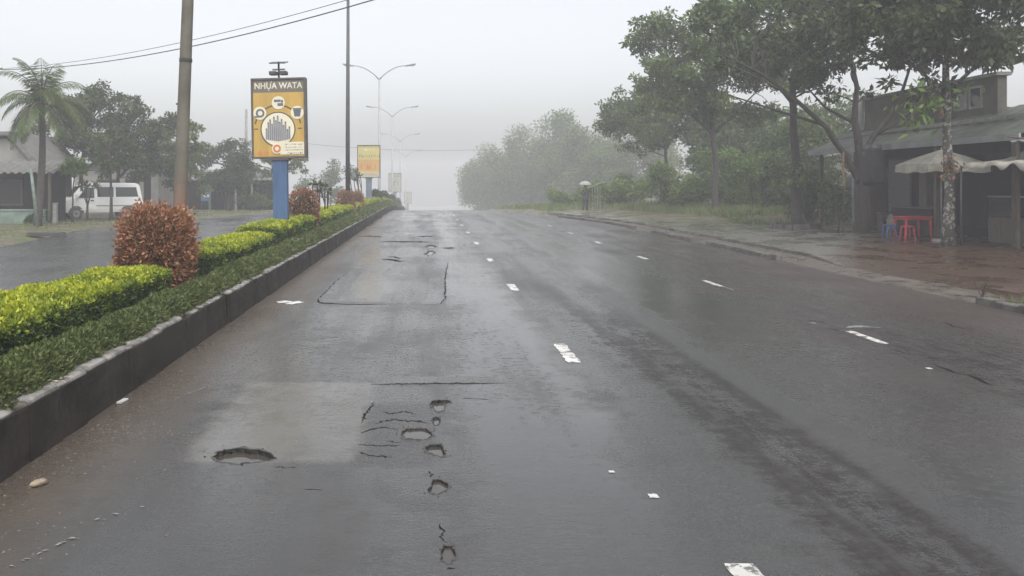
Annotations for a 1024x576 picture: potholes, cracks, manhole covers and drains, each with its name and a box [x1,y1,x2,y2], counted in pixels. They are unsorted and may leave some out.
crack [934,364,993,386]
pothole [396,426,435,440]
pothole [429,397,452,412]
pothole [424,476,452,497]
pothole [204,446,277,465]
crack [357,402,429,458]
pothole [439,544,458,564]
pothole [422,443,451,457]
